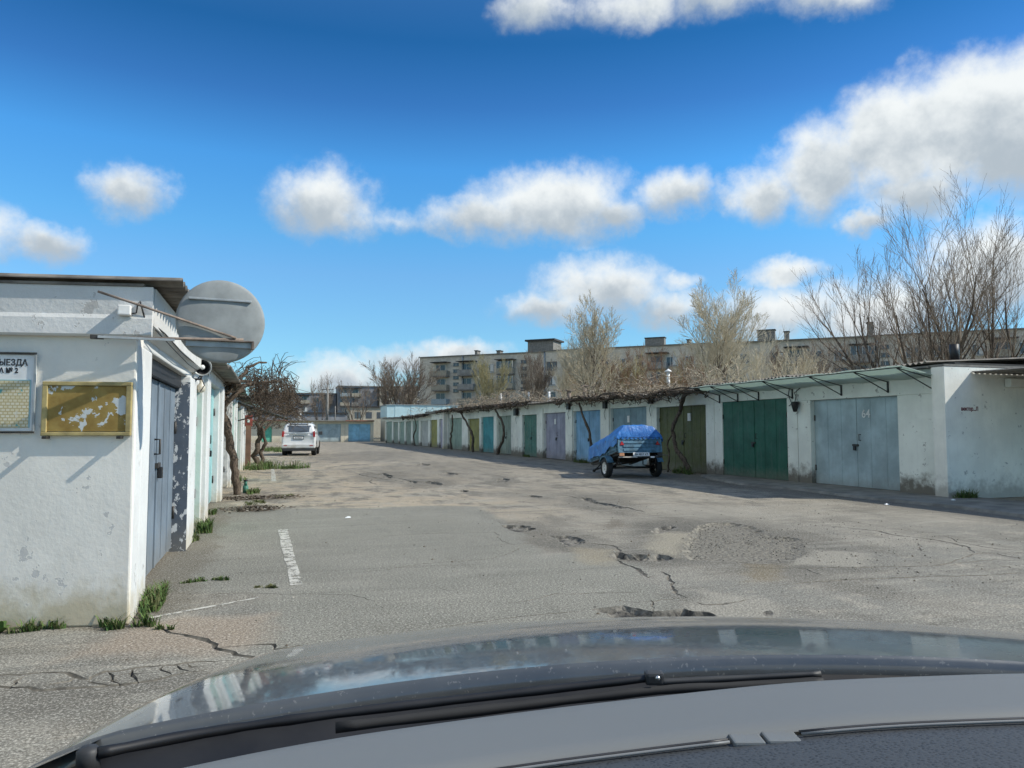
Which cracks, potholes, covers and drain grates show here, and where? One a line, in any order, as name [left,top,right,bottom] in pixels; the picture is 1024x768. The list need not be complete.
crack [428,535,753,630]
crack [0,629,301,691]
pothole [501,525,536,533]
pothole [592,605,716,618]
pothole [650,525,679,533]
pothole [608,552,674,562]
pothole [548,535,586,547]
